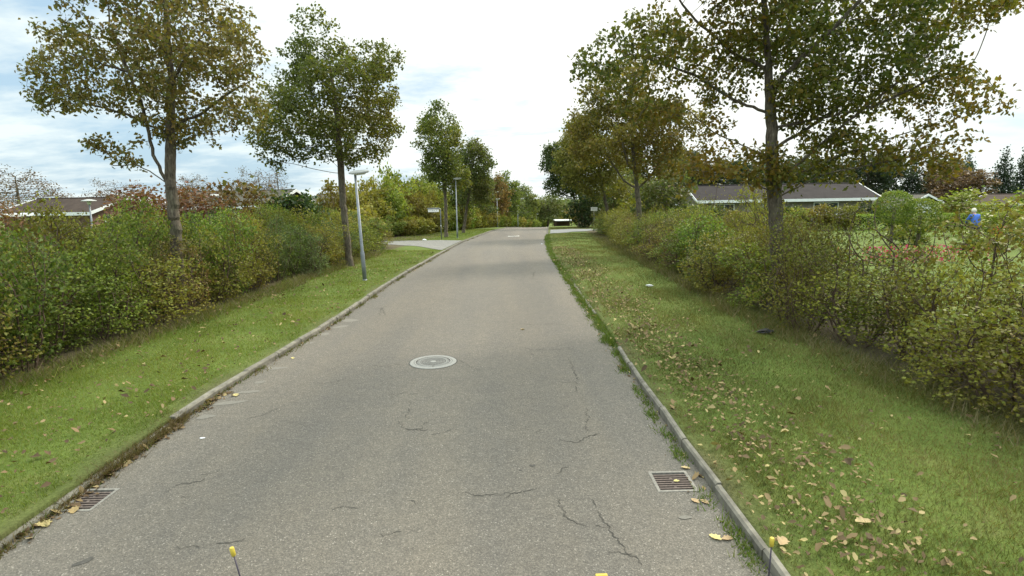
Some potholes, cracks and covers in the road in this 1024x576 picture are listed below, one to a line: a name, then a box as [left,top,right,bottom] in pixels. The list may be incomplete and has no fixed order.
drain grate [648,471,699,492]
manhole cover [409,355,458,369]
crack [463,488,538,500]
drain grate [60,488,120,512]
crack [558,499,642,565]
